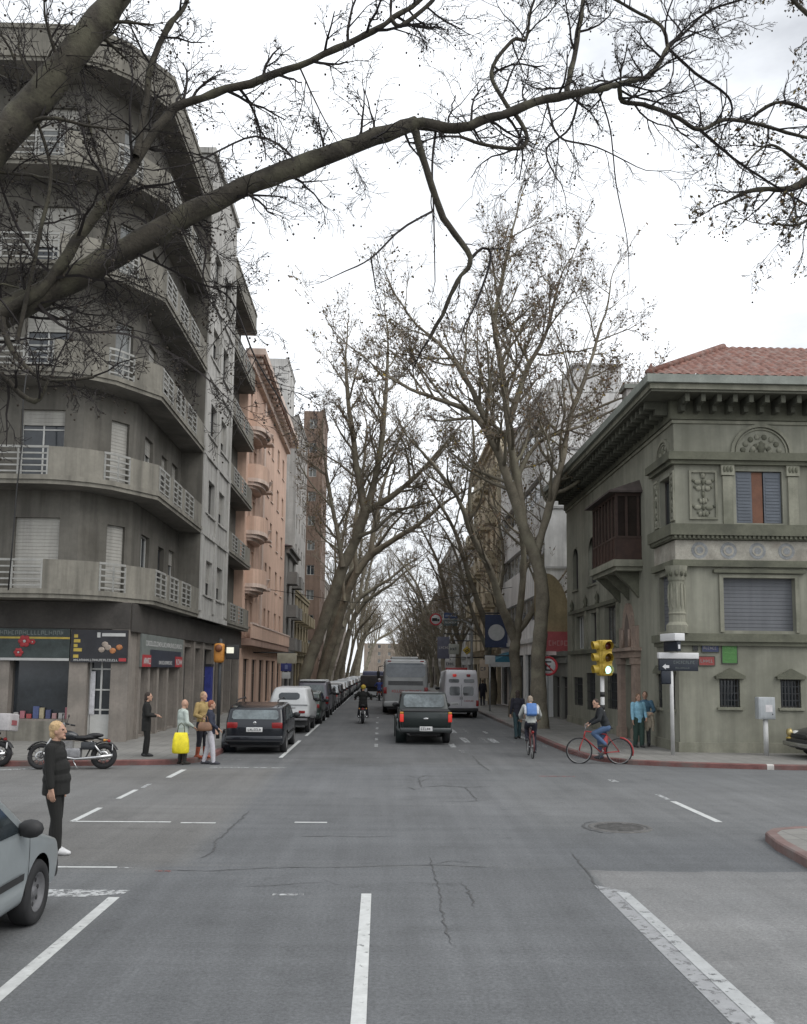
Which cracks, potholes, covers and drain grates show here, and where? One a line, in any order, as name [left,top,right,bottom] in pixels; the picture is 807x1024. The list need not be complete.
crack [573,854,599,888]
crack [200,811,481,943]
manhole cover [582,821,653,834]
crack [407,756,490,802]
